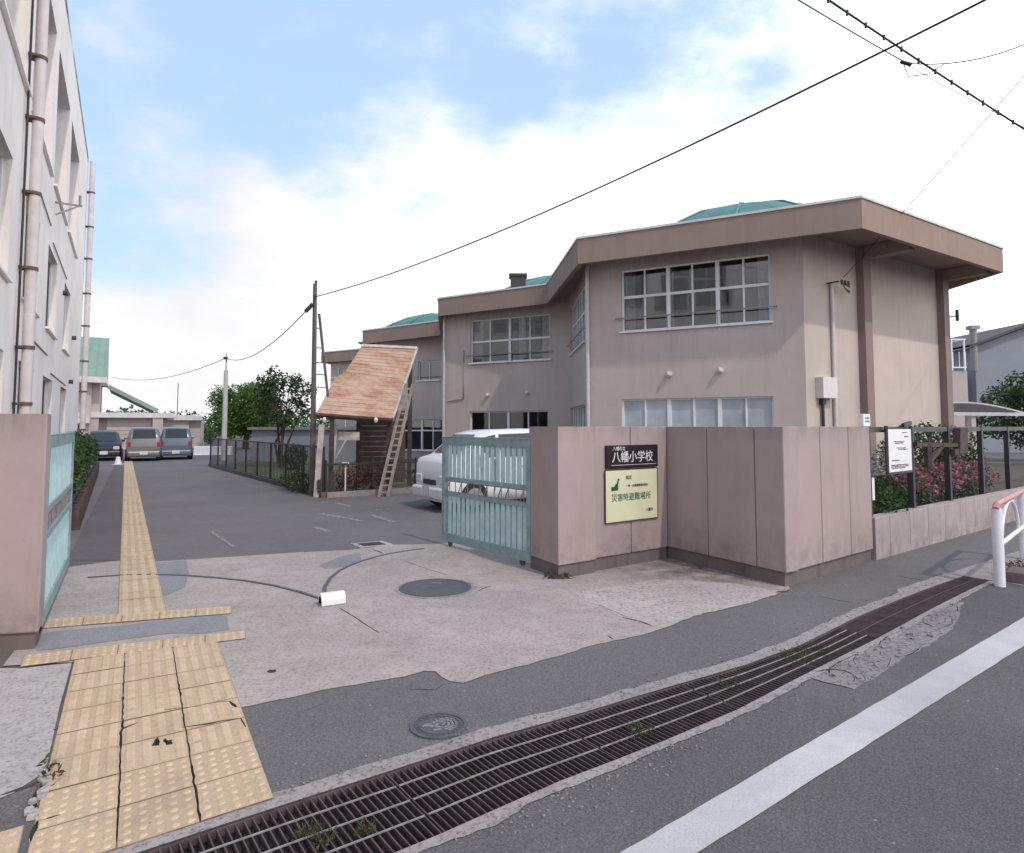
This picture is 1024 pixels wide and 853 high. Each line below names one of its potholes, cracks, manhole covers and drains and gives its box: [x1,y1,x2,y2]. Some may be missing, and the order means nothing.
drain grate [777,628,877,668]
drain grate [148,775,442,853]
manhole cover [410,712,467,740]
drain grate [928,577,987,595]
drain grate [681,655,816,709]
crack [811,605,959,689]
manhole cover [394,578,477,598]
drain grate [886,590,958,614]
drain grate [838,606,921,638]
crack [116,662,136,842]
drain grate [555,685,738,759]
drain grate [387,723,616,833]
